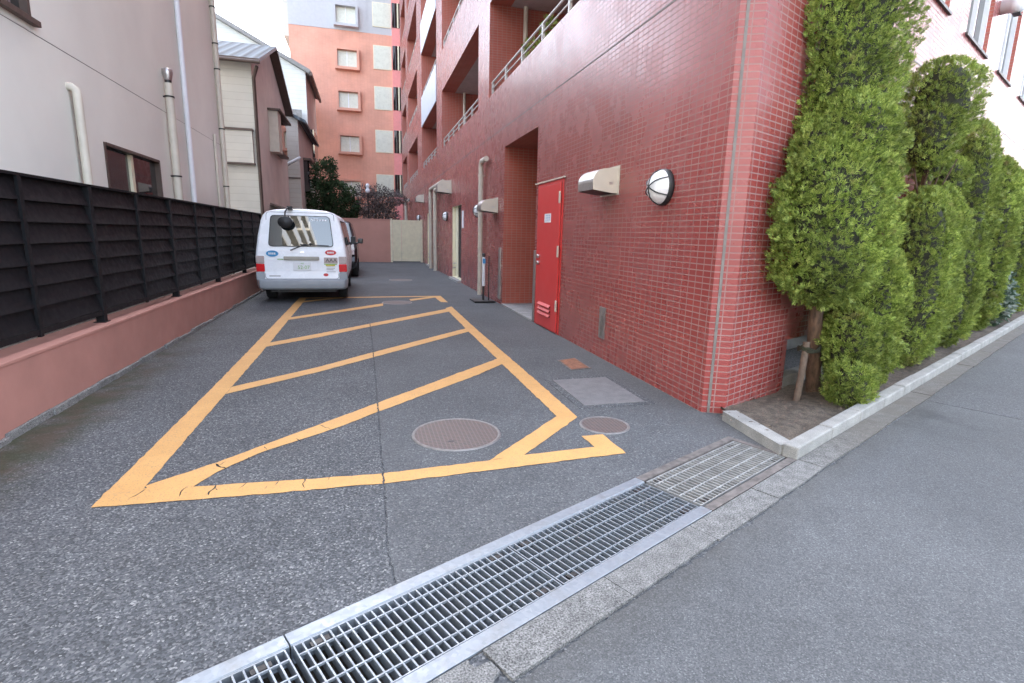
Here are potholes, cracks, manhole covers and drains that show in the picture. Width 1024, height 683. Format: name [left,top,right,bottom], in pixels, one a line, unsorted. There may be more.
drain grate [508,483,698,585]
manhole cover [579,416,630,434]
drain grate [293,546,563,683]
manhole cover [557,358,591,370]
drain grate [646,441,785,507]
manhole cover [544,375,656,409]
manhole cover [412,418,501,451]
